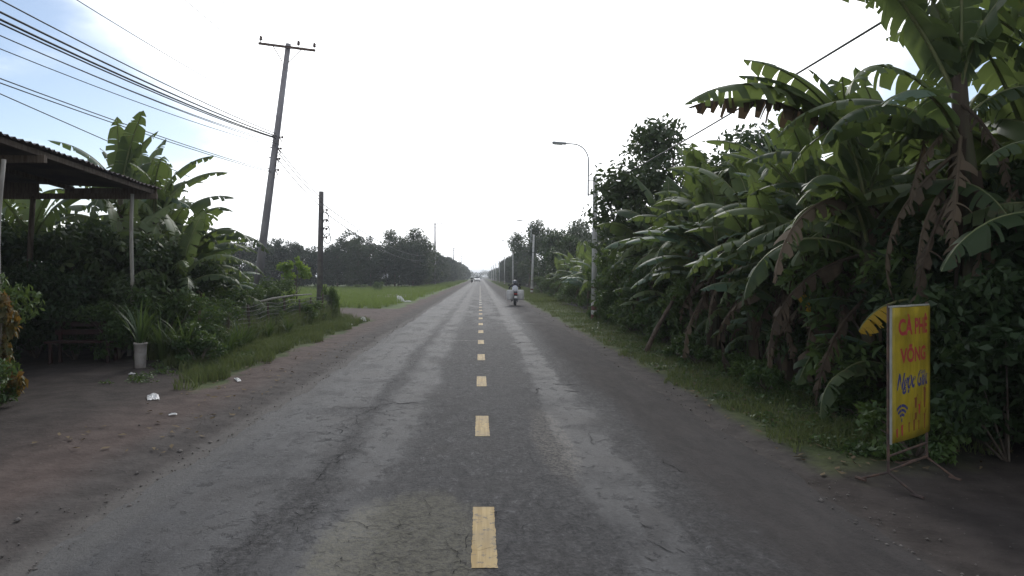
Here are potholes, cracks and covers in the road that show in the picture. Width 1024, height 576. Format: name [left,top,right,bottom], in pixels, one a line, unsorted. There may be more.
crack [298,378,415,486]
crack [218,490,555,576]
